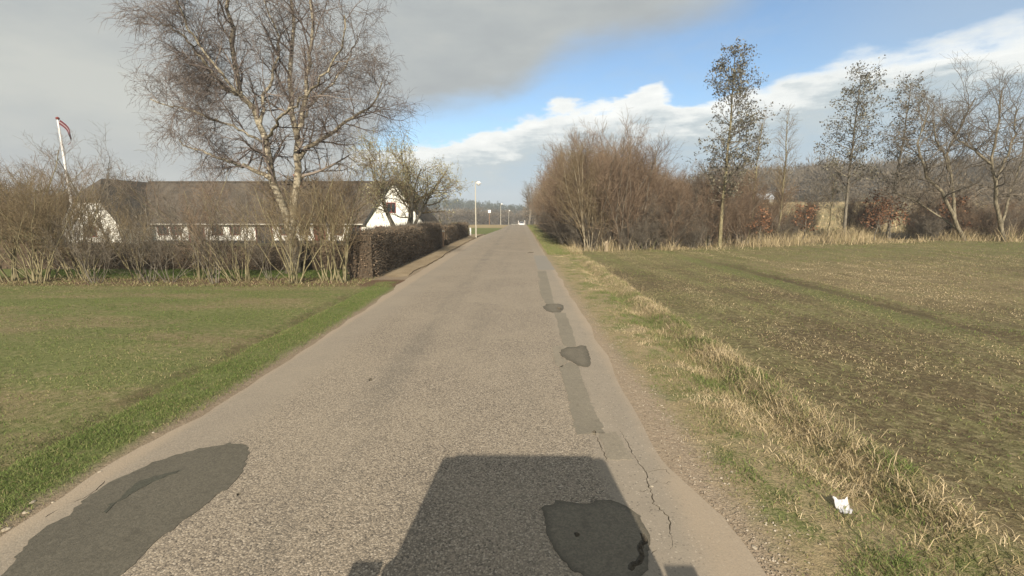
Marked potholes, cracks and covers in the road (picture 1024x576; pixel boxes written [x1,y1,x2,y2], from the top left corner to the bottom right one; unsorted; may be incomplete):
crack [620,431,673,553]
